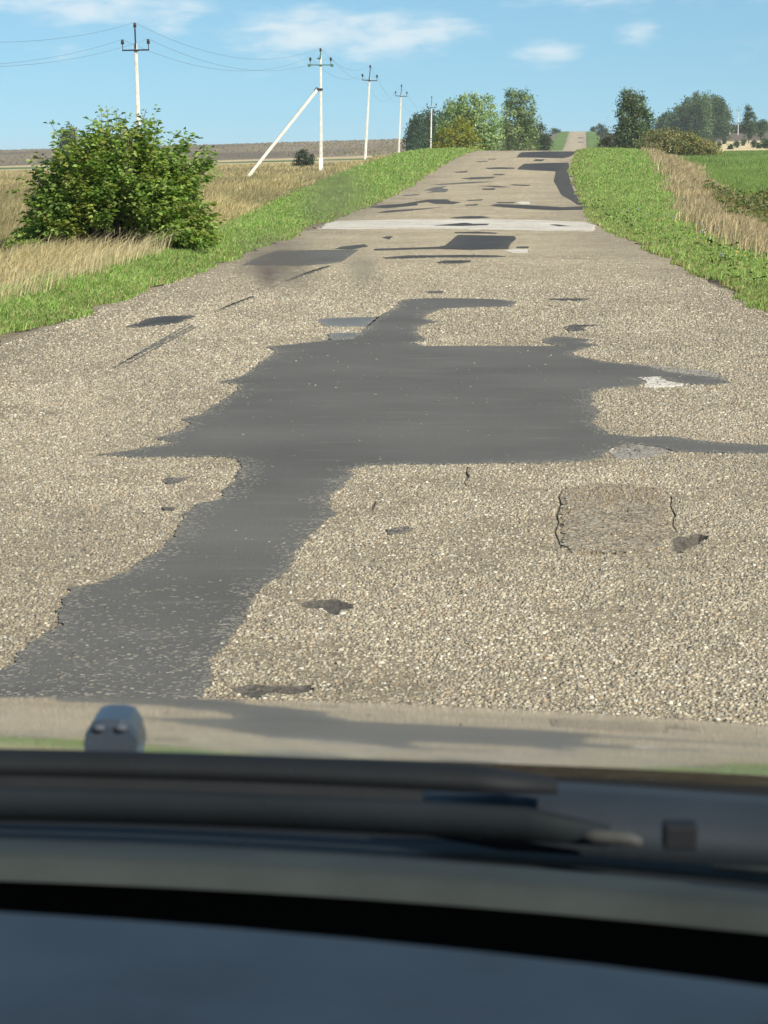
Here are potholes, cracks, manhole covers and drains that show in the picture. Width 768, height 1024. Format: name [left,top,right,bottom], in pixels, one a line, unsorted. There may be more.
pothole [231,684,314,699]
crack [665,491,677,532]
crack [555,489,563,549]
pothole [672,534,708,554]
pothole [301,600,353,615]
